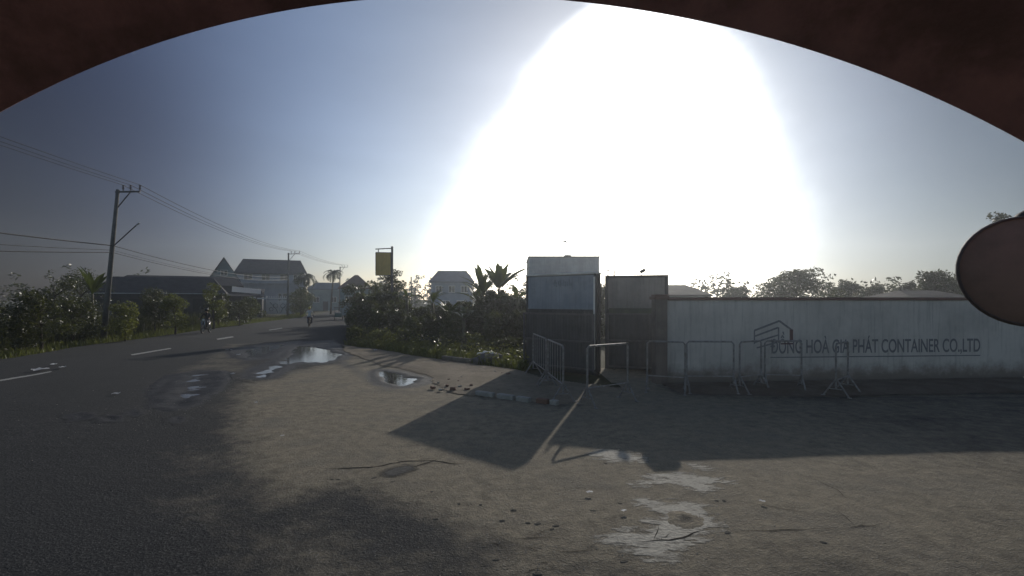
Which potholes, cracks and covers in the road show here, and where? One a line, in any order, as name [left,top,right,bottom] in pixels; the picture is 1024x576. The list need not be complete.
crack [641,514,707,542]
pothole [369,369,430,388]
crack [333,458,456,471]
pothole [246,345,349,378]
pothole [144,370,232,412]
pothole [666,511,704,530]
